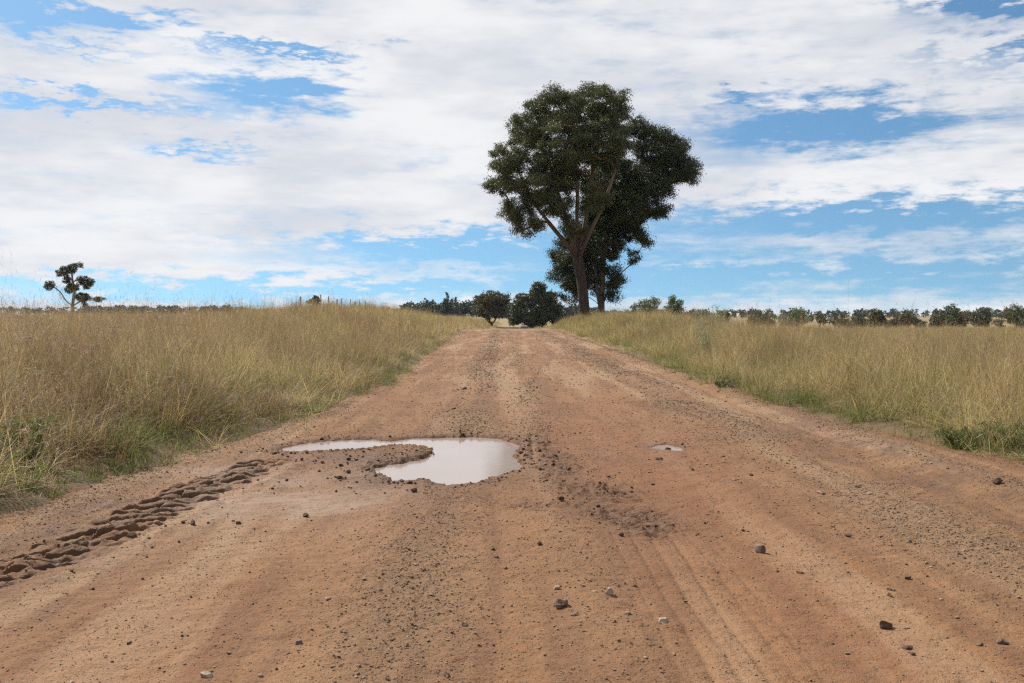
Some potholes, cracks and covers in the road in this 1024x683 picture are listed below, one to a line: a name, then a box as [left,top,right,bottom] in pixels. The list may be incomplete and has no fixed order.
pothole [239,430,558,495]
